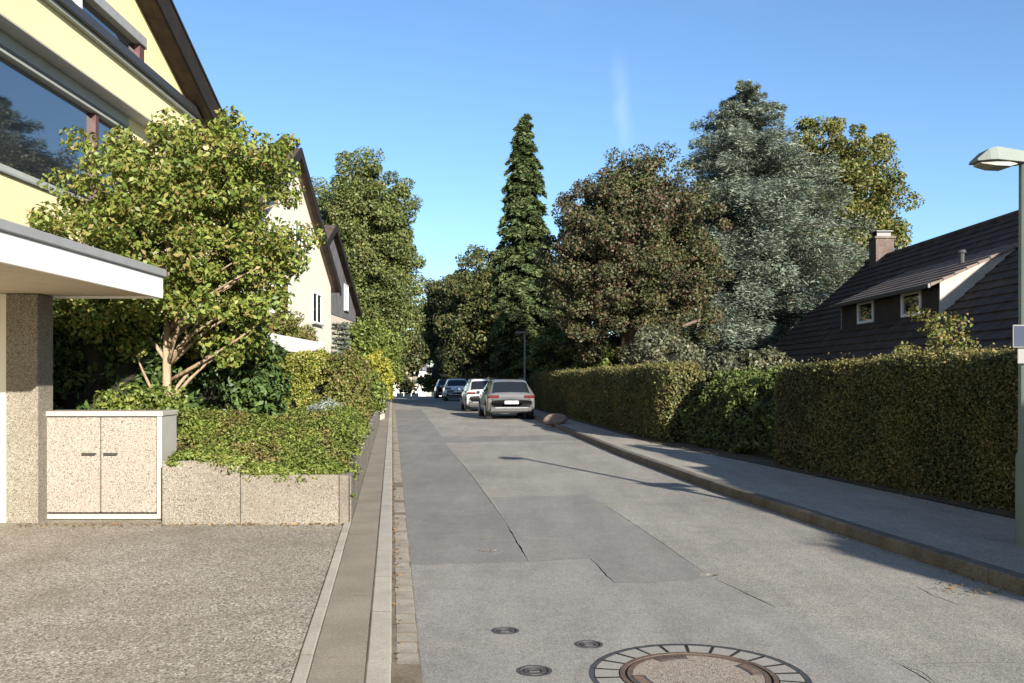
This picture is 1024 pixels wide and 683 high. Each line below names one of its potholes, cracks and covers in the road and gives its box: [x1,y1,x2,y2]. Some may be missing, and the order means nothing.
utility cover [516,665,552,677]
manhole cover [589,644,812,683]
utility cover [574,640,603,649]
crack [897,662,1009,683]
utility cover [491,627,519,635]
